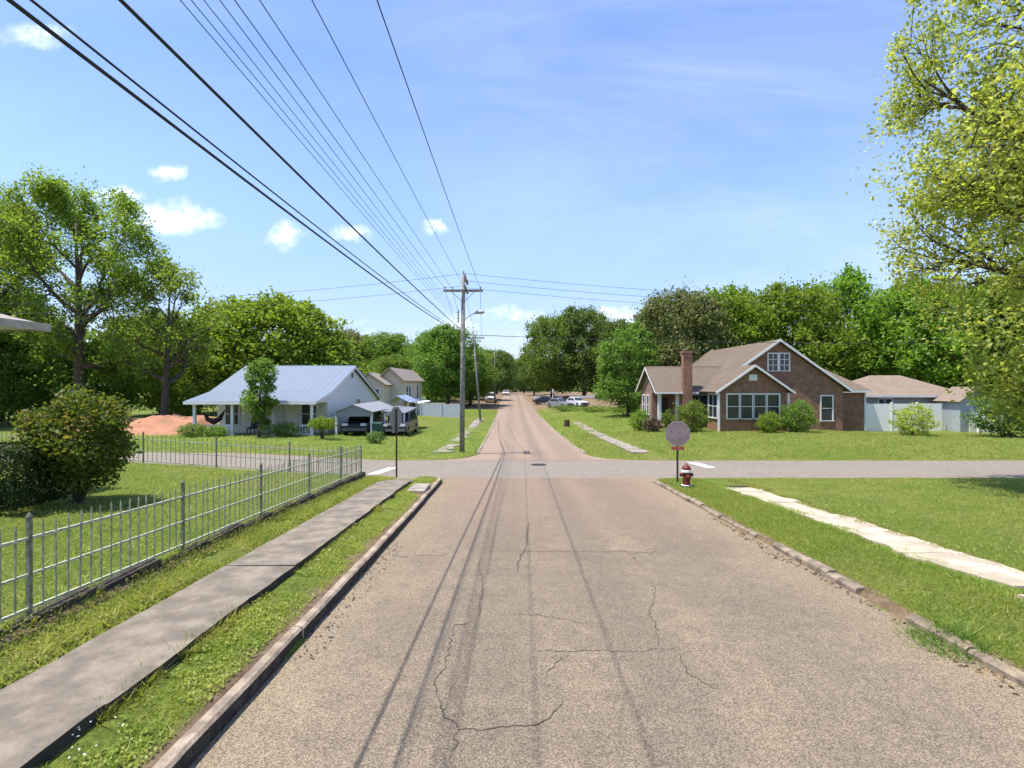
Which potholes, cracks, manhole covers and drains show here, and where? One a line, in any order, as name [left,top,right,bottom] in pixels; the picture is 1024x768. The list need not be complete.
crack [546,585,717,689]
crack [434,522,645,750]
